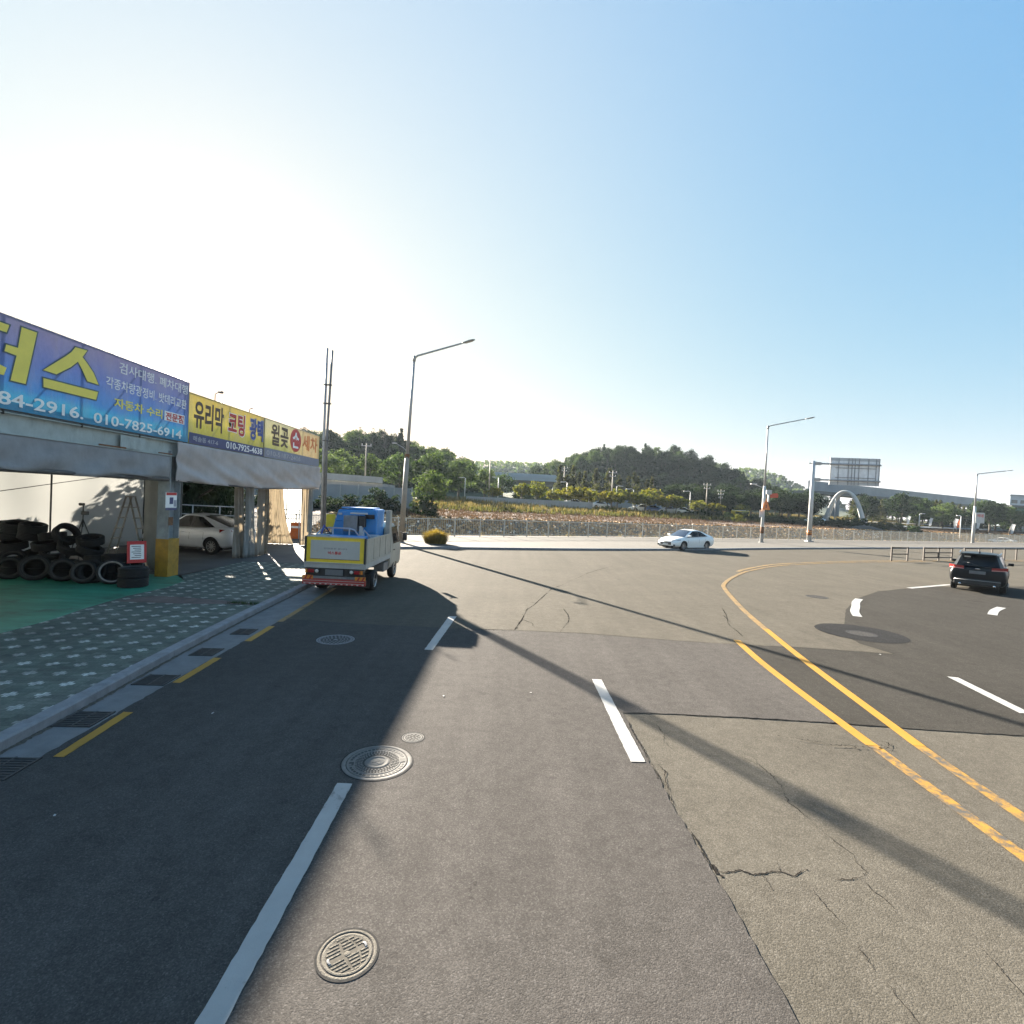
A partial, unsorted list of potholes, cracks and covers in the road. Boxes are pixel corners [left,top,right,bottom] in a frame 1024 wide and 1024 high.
crack [515,568,604,632]
manhole cover [401,732,425,743]
crack [725,754,920,1024]
drain grate [188,648,224,656]
manhole cover [314,928,379,982]
manhole cover [340,745,413,781]
drain grate [0,756,43,781]
crack [629,723,808,890]
drain grate [131,674,181,686]
manhole cover [315,634,356,645]
drain grate [50,710,116,728]
